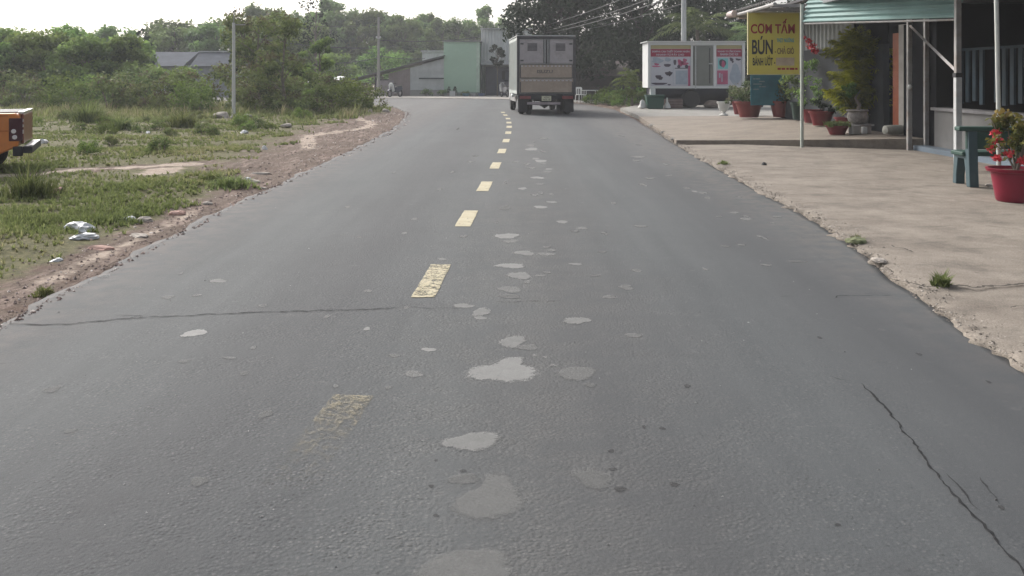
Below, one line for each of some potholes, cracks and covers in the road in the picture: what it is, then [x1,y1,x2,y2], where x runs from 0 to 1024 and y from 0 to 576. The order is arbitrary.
crack [861,383,1024,575]
crack [4,307,395,325]
crack [836,278,938,298]
